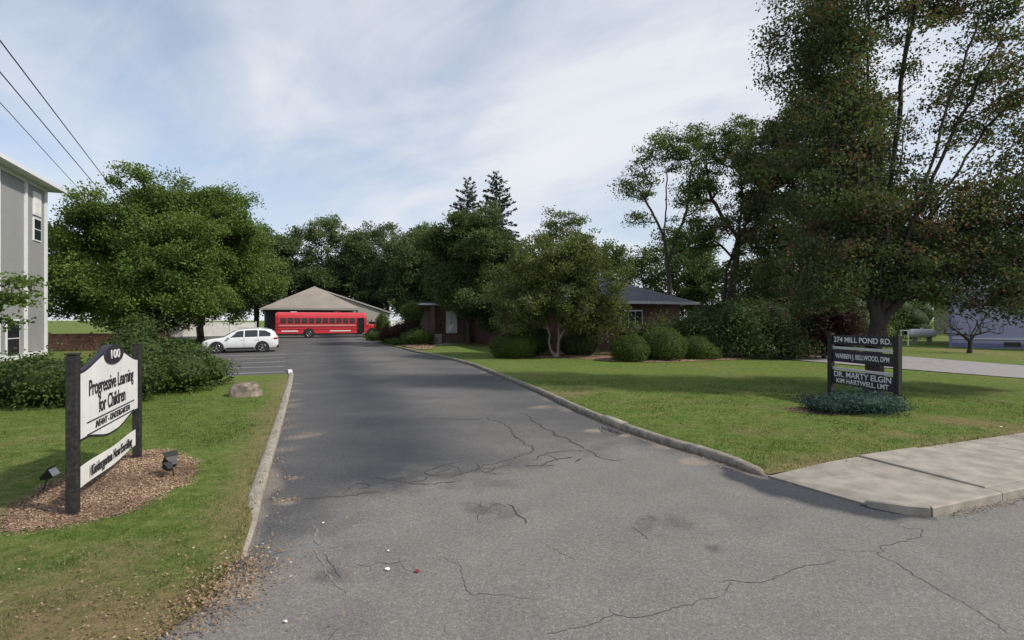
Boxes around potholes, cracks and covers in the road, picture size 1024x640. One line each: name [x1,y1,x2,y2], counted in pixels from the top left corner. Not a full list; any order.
crack [836,526,1007,633]
crack [313,526,409,593]
crack [556,560,835,633]
crack [308,413,615,499]
